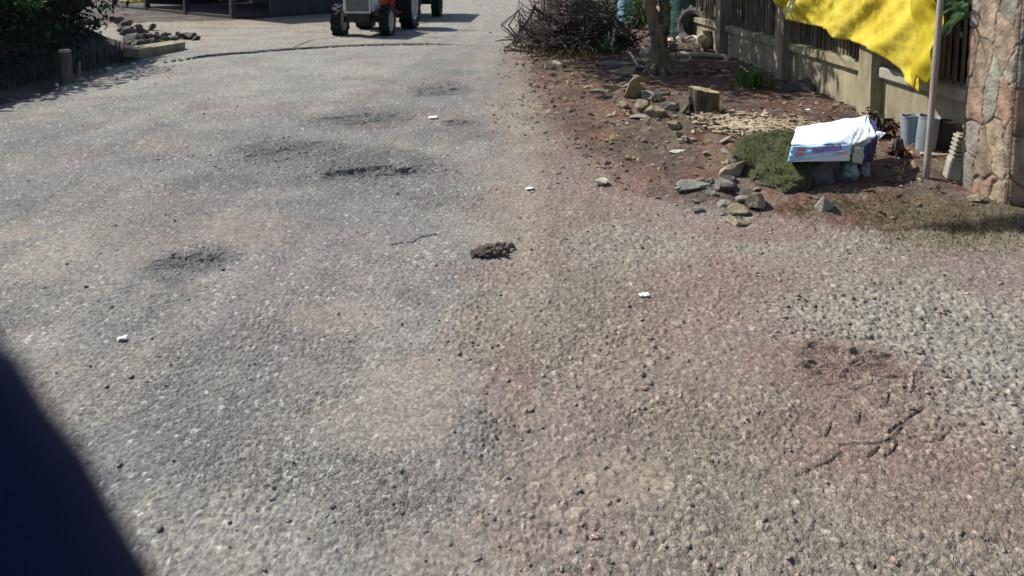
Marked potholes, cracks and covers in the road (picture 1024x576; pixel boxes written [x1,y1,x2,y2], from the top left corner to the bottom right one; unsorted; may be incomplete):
pothole [225,139,344,163]
pothole [143,251,227,272]
crack [392,234,437,246]
pothole [410,85,471,97]
pothole [305,111,416,129]
pothole [786,338,932,390]
pothole [310,163,446,181]
crack [796,376,954,477]
